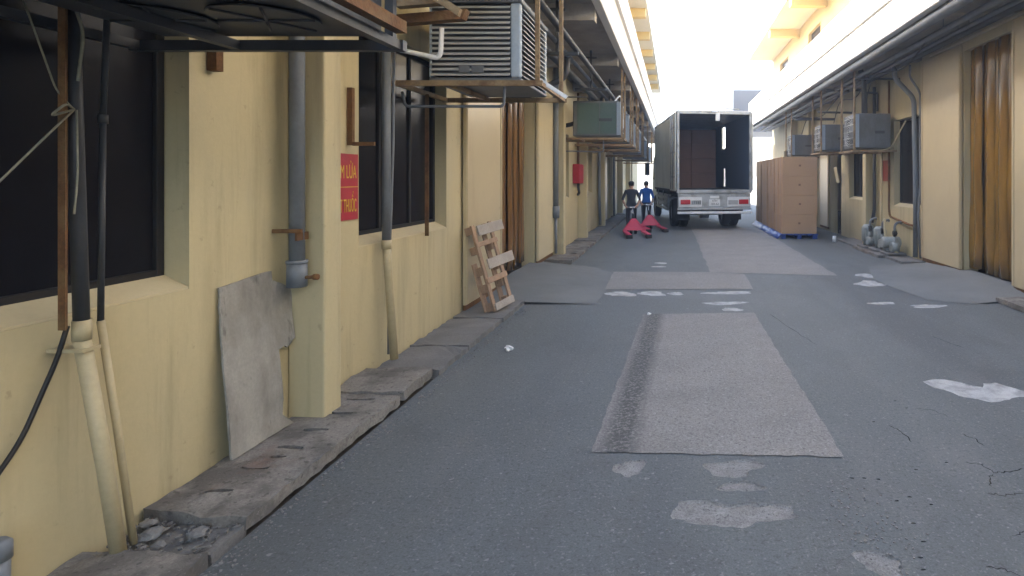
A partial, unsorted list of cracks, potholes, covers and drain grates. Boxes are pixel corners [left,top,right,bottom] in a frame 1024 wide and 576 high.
crack [967,462,1022,496]
